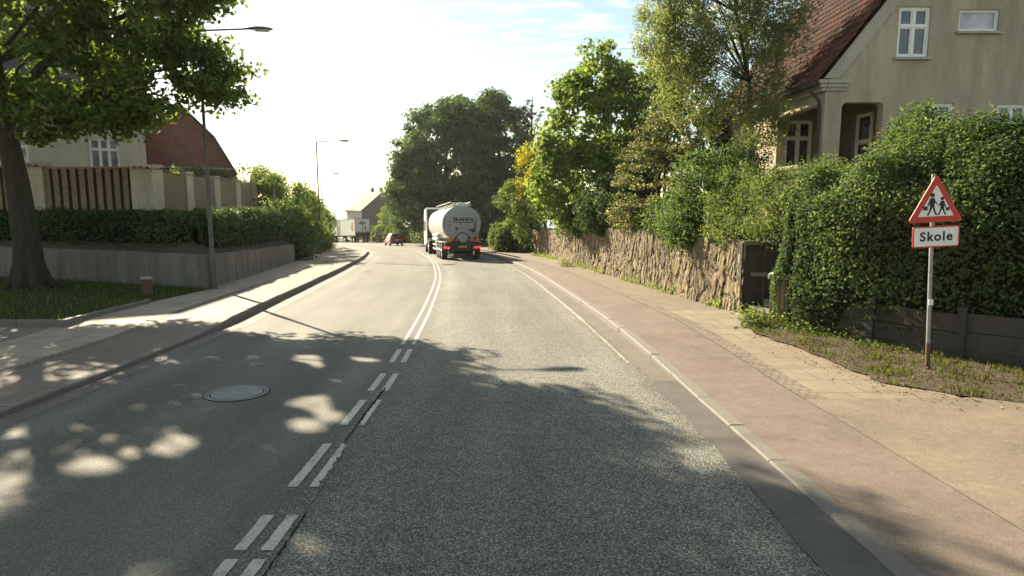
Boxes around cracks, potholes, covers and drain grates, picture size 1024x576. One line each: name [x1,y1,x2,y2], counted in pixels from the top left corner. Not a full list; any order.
manhole cover [203,385,270,402]
